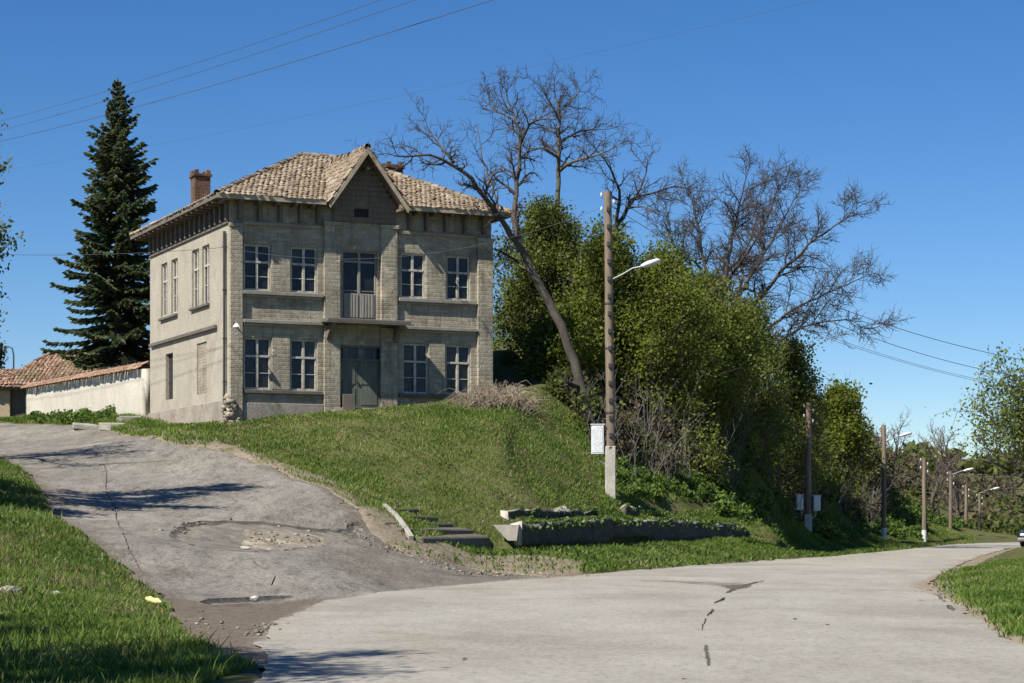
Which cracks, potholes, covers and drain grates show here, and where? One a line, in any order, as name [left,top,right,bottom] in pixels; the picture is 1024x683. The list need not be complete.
pothole [200,595,293,605]
crack [27,460,170,577]
pothole [169,520,366,552]
